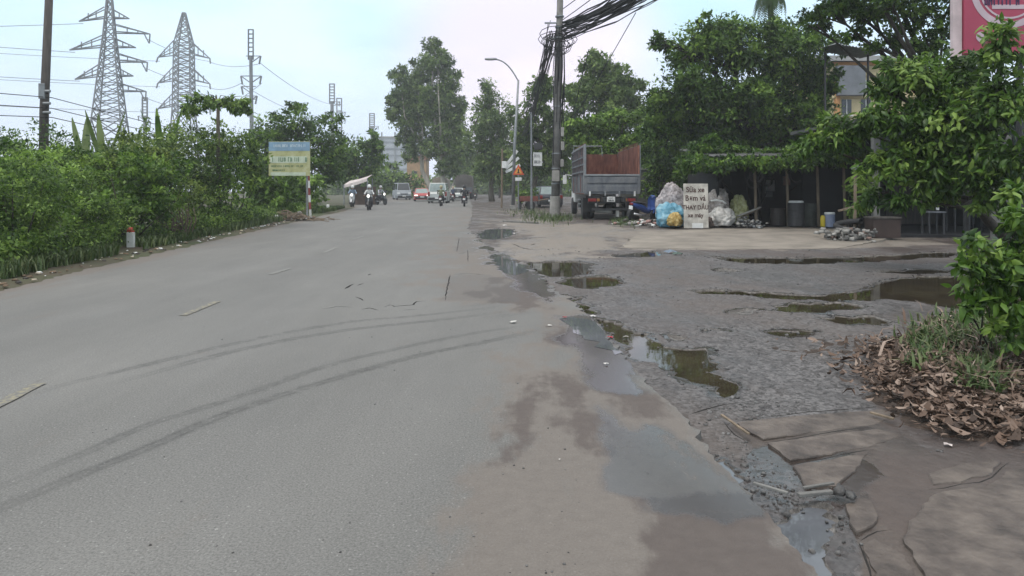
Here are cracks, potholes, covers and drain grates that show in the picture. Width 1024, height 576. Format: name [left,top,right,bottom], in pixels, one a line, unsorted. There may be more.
pothole [555,274,626,289]
pothole [765,327,817,337]
crack [324,274,420,310]
crack [929,463,1008,490]
pothole [687,275,1021,312]
crack [692,402,874,441]
pothole [477,228,516,240]
pothole [772,502,863,576]
pothole [526,260,598,277]
pothole [818,314,898,326]
pothole [704,251,958,264]
pothole [593,317,740,399]
